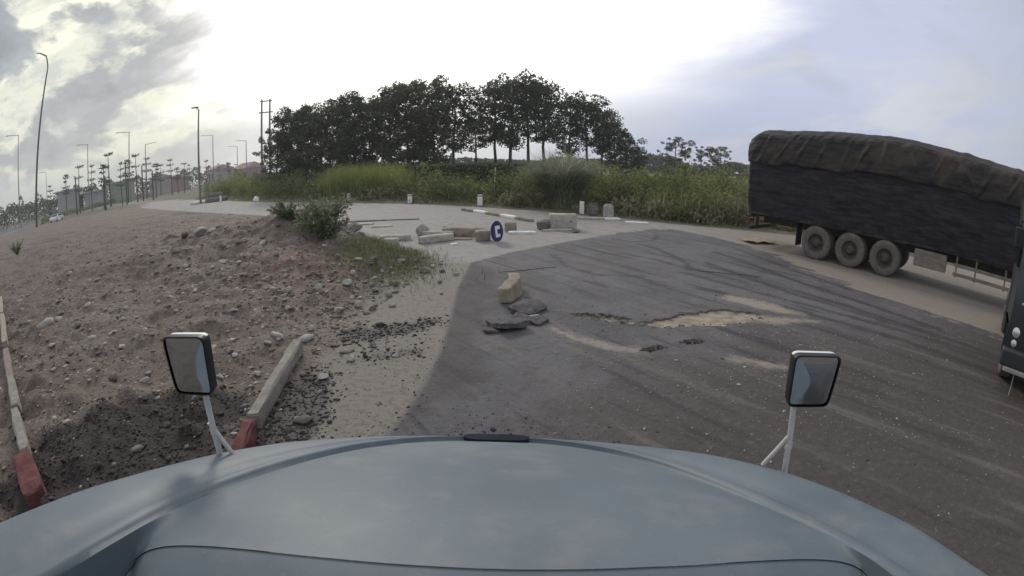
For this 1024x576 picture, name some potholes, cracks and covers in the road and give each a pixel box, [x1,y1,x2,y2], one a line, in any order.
pothole [559,309,642,326]
pothole [627,306,775,333]
crack [499,266,559,274]
crack [688,269,761,279]
